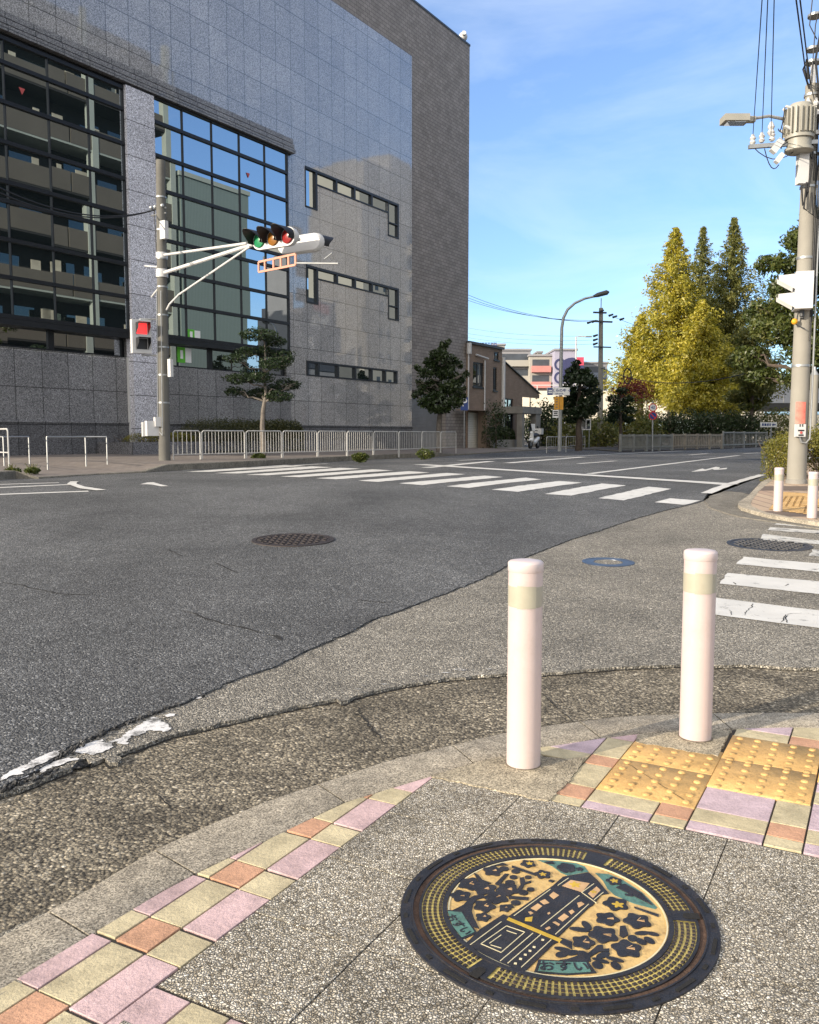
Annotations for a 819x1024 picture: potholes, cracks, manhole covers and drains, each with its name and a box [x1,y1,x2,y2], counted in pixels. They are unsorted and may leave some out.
manhole cover [251,533,334,547]
manhole cover [582,557,635,567]
crack [182,610,282,640]
manhole cover [726,538,813,552]
manhole cover [400,838,721,1016]
crack [3,582,117,598]
crack [353,704,385,744]
